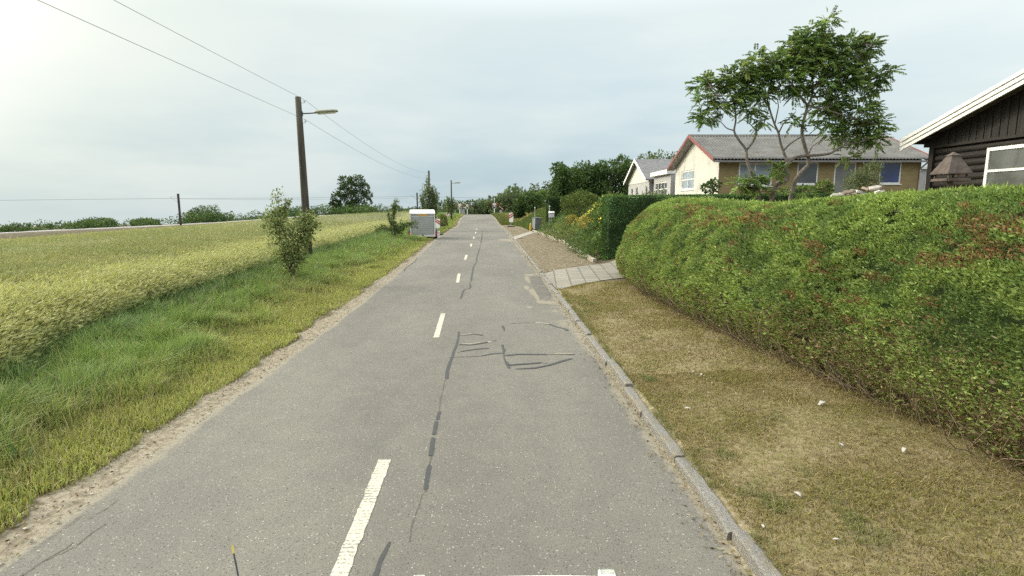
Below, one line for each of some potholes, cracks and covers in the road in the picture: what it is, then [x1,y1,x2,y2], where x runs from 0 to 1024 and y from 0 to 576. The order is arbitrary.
crack [20,500,117,576]
